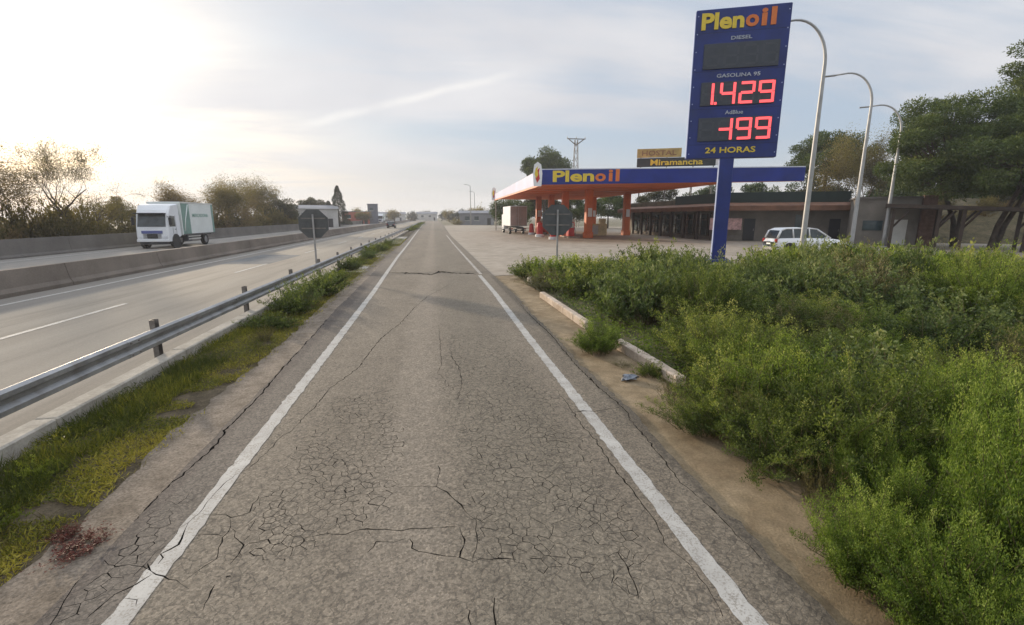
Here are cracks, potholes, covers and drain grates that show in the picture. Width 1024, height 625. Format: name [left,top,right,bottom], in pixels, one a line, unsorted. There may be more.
crack [50,291,762,625]
